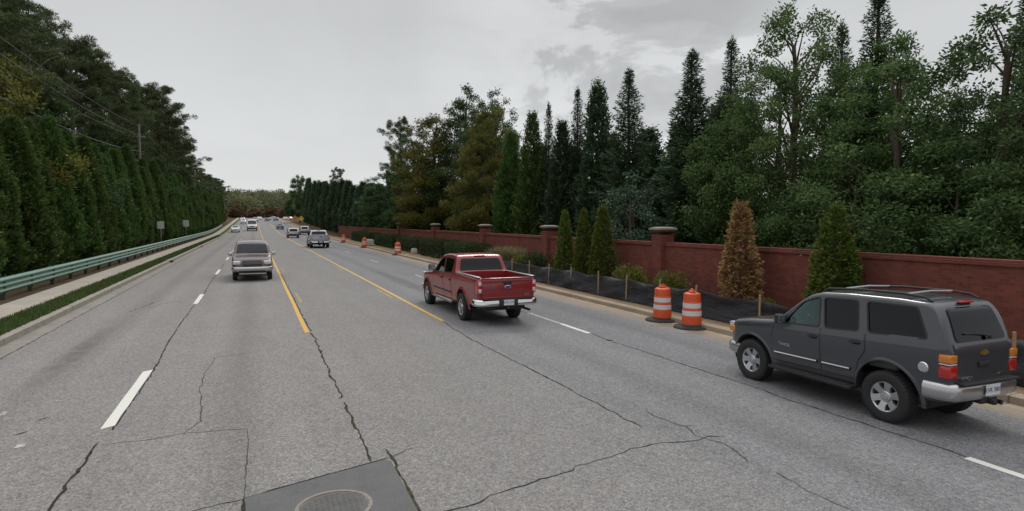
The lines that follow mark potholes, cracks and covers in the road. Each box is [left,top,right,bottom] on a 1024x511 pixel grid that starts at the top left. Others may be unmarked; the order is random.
manhole cover [294,489,373,511]
crack [102,353,249,511]
crack [445,410,854,511]
